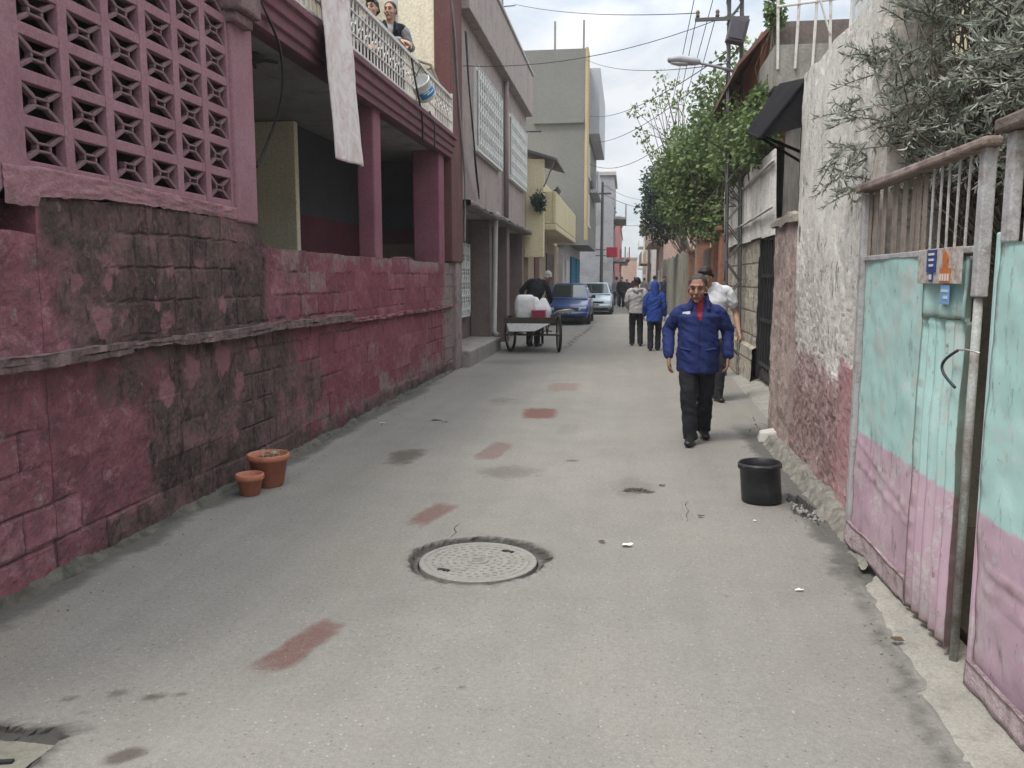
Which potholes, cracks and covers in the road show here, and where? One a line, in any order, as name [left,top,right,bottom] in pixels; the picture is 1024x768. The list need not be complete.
crack [447,522,464,538]
manhole cover [399,535,564,590]
pothole [613,486,666,496]
crack [682,500,693,522]
